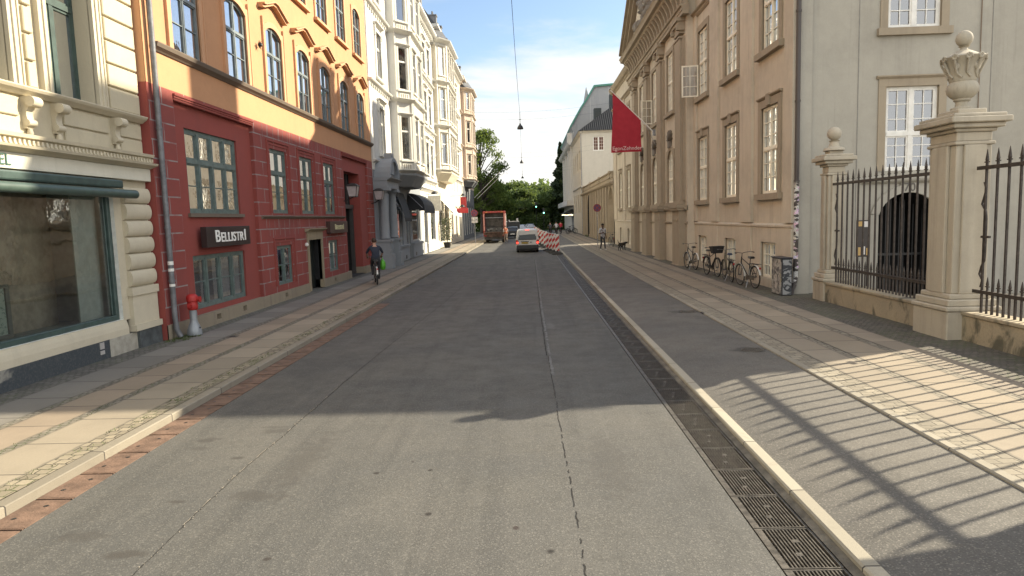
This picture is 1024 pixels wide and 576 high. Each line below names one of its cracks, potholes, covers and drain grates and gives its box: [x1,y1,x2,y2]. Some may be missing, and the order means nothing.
drain grate [730,495,808,531]
crack [534,260,587,576]
drain grate [696,447,755,471]
drain grate [653,388,693,401]
drain grate [754,528,844,571]
drain grate [661,400,705,415]
drain grate [633,361,665,370]
drain grate [628,354,658,362]
drain grate [623,347,651,355]
drain grate [639,369,673,379]
drain grate [671,414,719,430]
drain grate [645,378,682,390]
